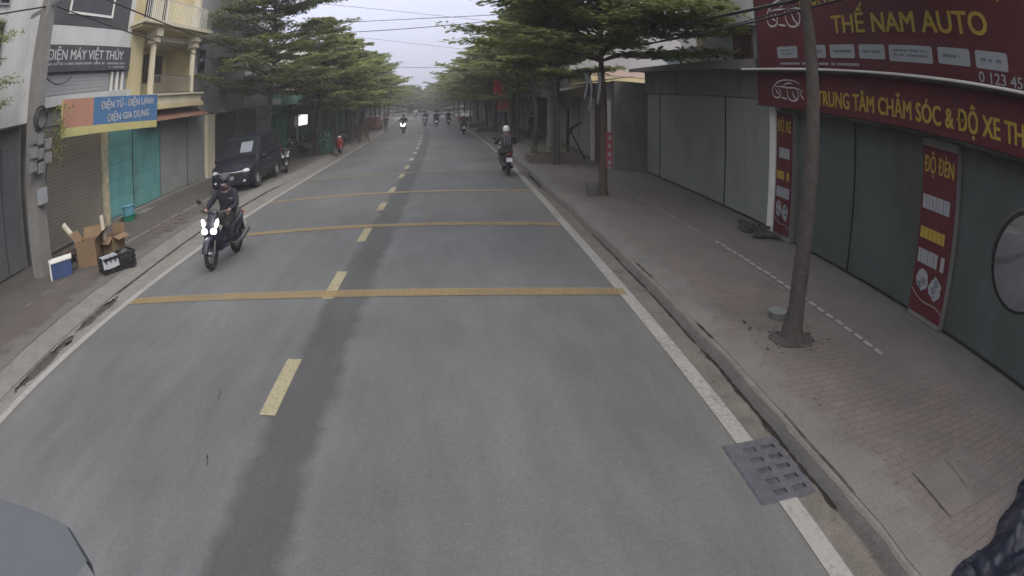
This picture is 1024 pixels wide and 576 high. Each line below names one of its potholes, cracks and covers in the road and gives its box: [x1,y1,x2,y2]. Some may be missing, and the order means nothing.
drain grate [721,437,817,506]
